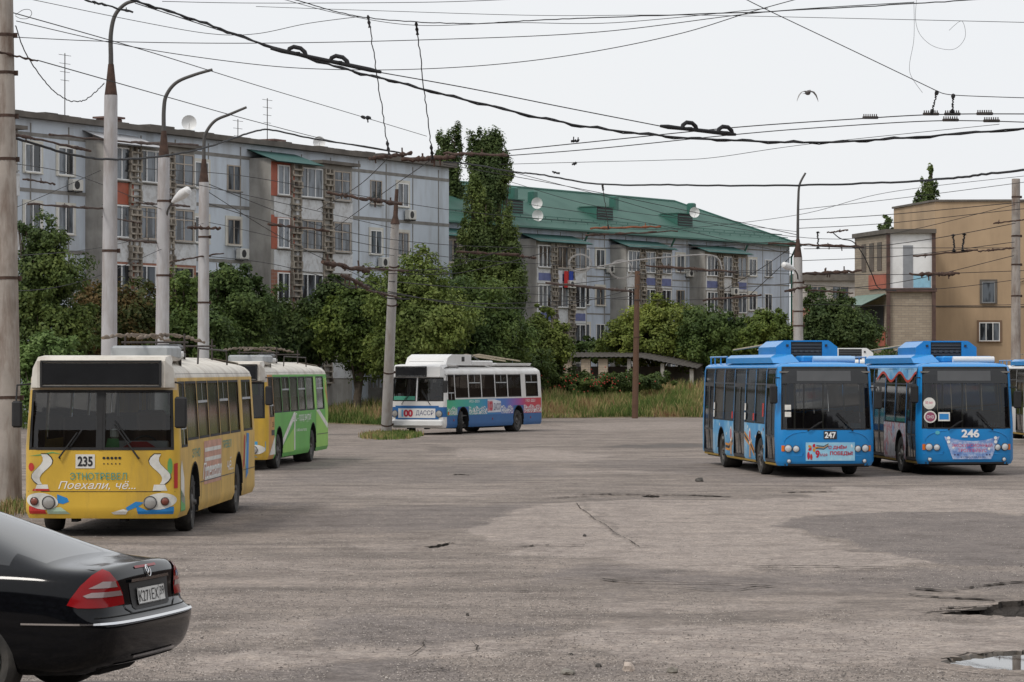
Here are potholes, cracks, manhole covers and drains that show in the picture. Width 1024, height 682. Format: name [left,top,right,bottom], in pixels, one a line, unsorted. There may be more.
pothole [412,542,464,550]
crack [909,581,1024,613]
pothole [908,649,1024,675]
pothole [917,599,1024,620]
